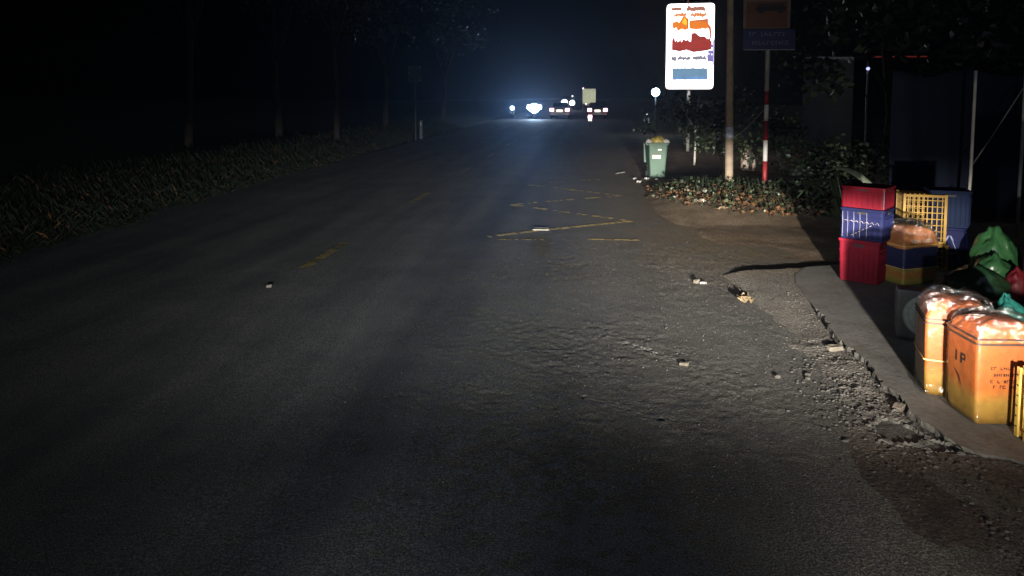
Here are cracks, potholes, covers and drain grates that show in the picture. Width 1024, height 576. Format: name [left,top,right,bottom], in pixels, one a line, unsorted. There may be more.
pothole [868,417,935,448]
